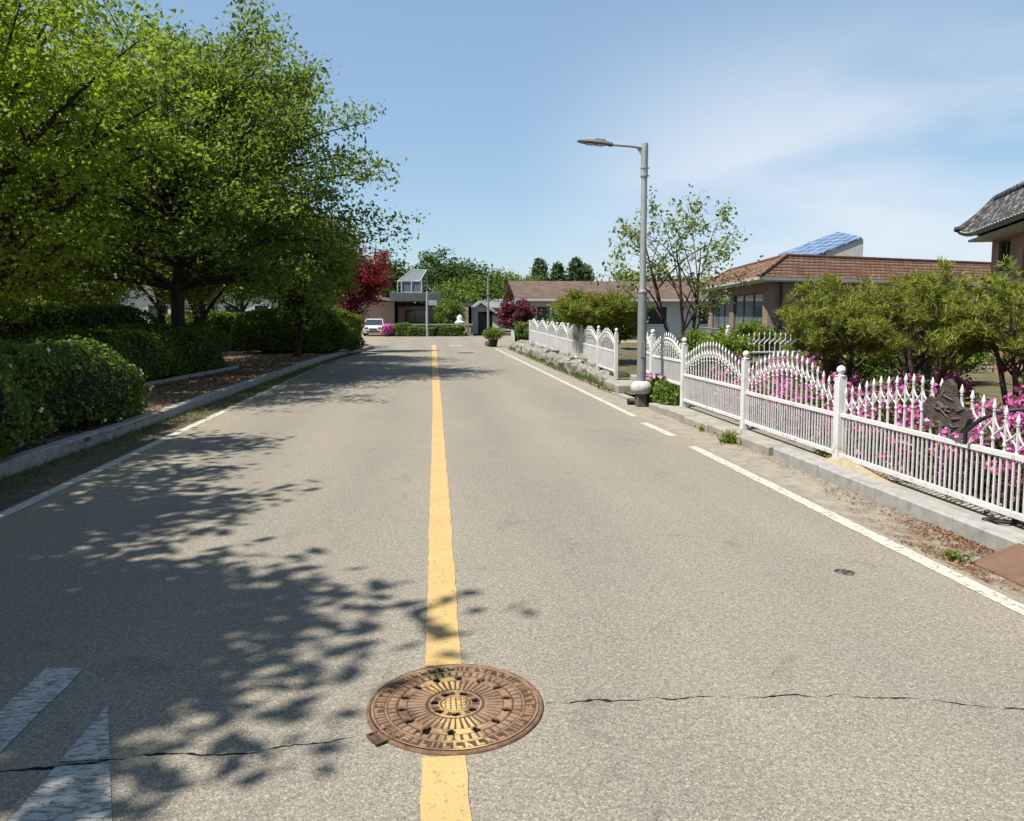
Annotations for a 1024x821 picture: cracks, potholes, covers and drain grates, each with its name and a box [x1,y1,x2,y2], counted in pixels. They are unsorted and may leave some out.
manhole cover [366,664,544,756]
crack [0,736,355,772]
crack [549,693,1024,710]
